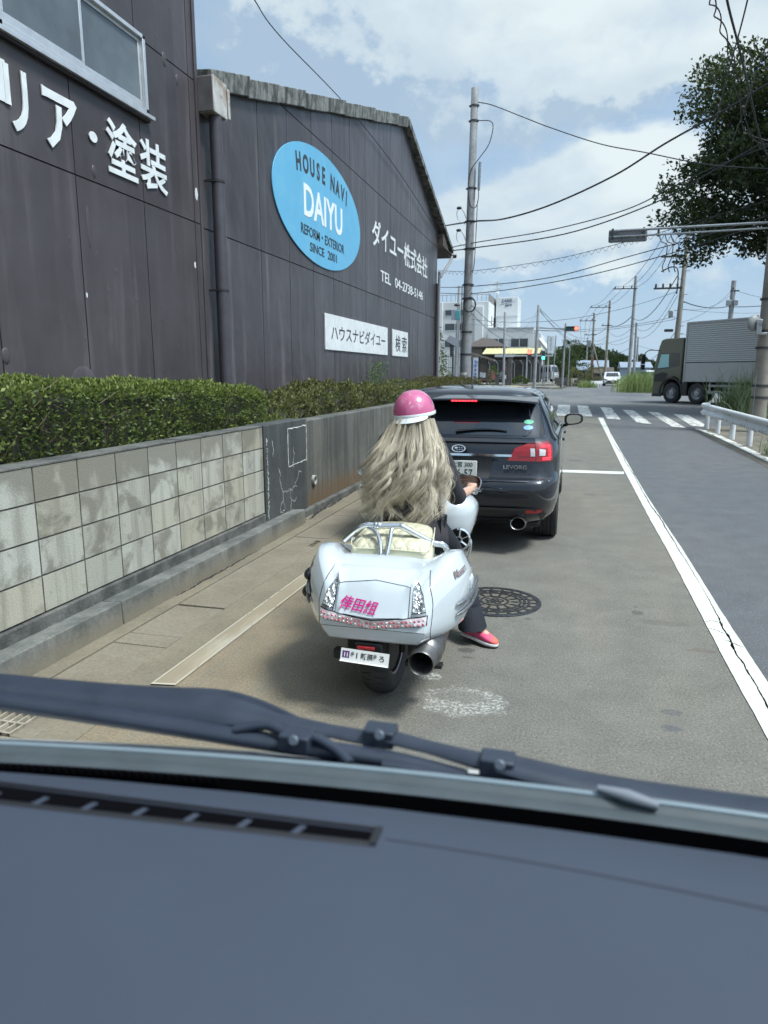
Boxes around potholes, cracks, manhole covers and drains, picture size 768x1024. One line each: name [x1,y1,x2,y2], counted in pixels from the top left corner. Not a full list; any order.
drain grate [0,711,39,737]
manhole cover [478,587,542,617]
